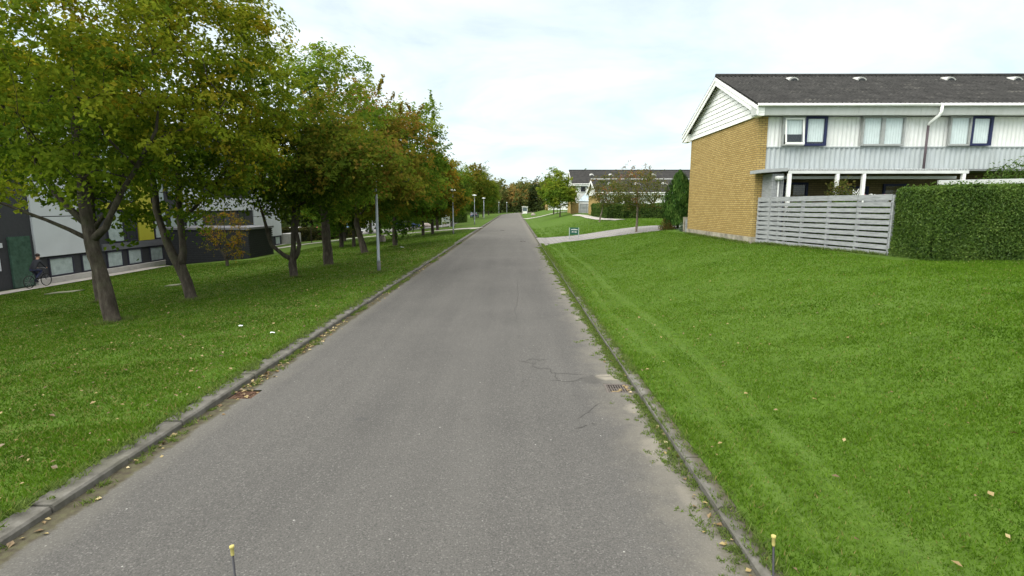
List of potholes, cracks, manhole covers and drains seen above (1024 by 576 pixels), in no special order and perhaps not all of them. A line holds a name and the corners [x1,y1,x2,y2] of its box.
crack [516,359,610,428]
drain grate [603,384,633,393]
